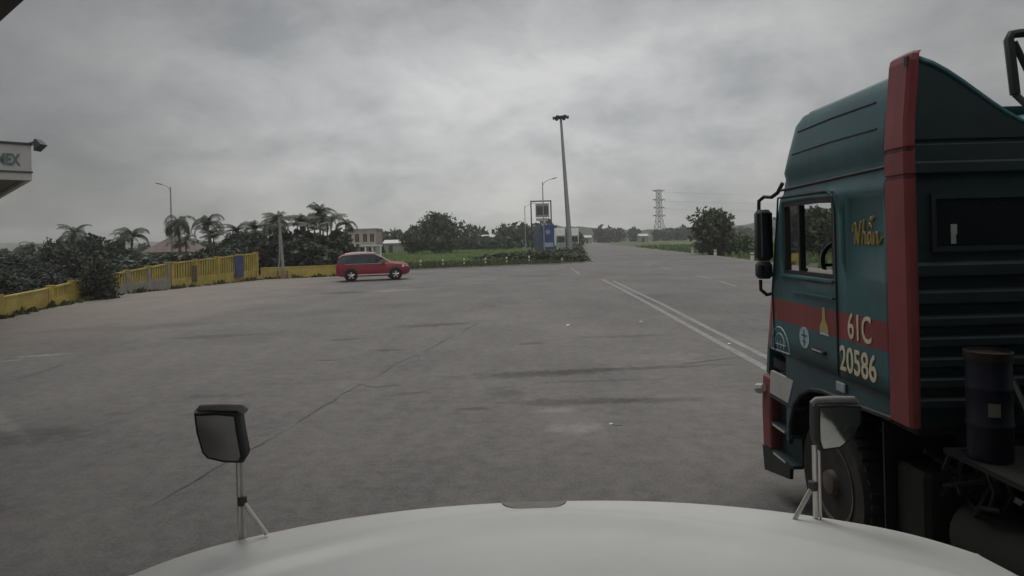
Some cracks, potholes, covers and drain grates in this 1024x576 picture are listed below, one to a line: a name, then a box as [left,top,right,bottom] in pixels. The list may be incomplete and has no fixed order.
crack [144,322,478,513]
